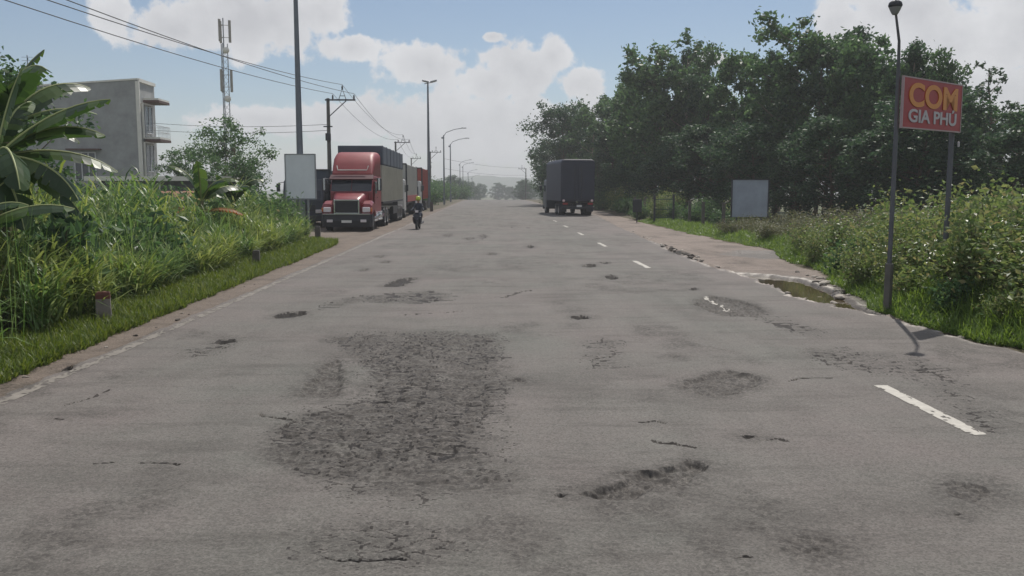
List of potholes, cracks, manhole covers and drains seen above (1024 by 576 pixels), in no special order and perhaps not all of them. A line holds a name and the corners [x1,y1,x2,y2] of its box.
pothole [384,277,412,287]
pothole [272,311,307,319]
pothole [675,370,765,398]
pothole [693,296,766,317]
crack [257,331,516,574]
crack [579,338,629,369]
pothole [579,459,710,502]
